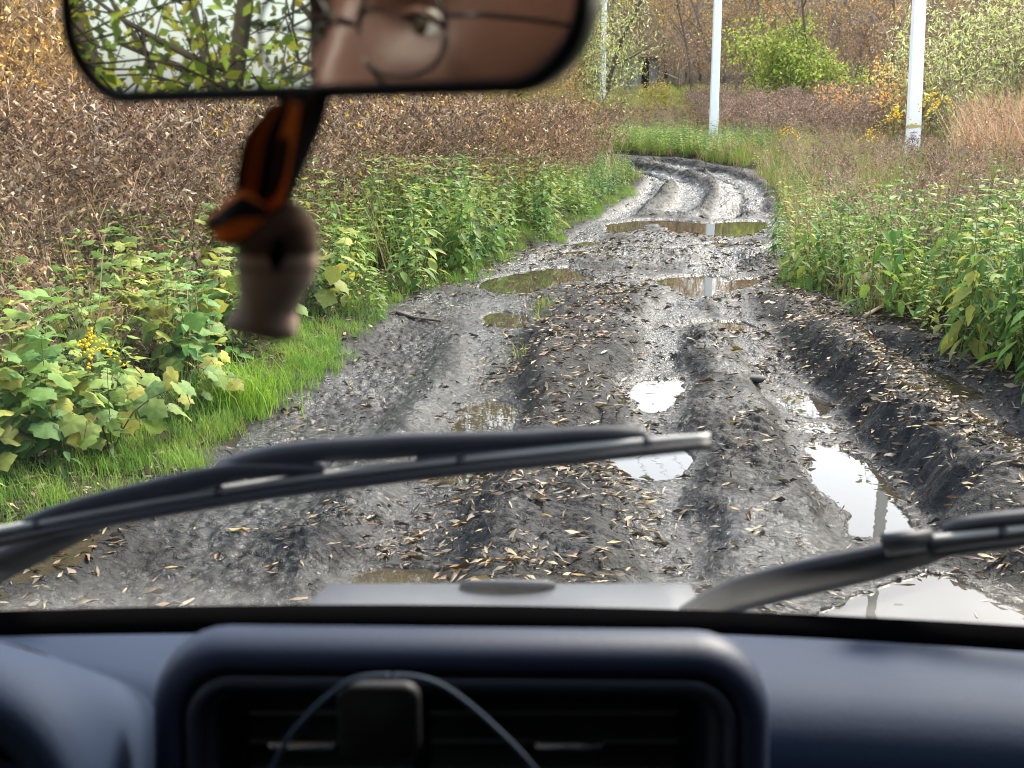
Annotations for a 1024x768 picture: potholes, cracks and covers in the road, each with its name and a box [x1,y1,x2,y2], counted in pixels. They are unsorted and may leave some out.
pothole [796,439,931,540]
pothole [473,307,536,329]
pothole [469,264,605,295]
pothole [803,565,1024,626]
pothole [612,434,702,484]
pothole [598,217,775,238]
pothole [407,396,526,488]
pothole [635,272,766,298]
pothole [615,374,693,415]
